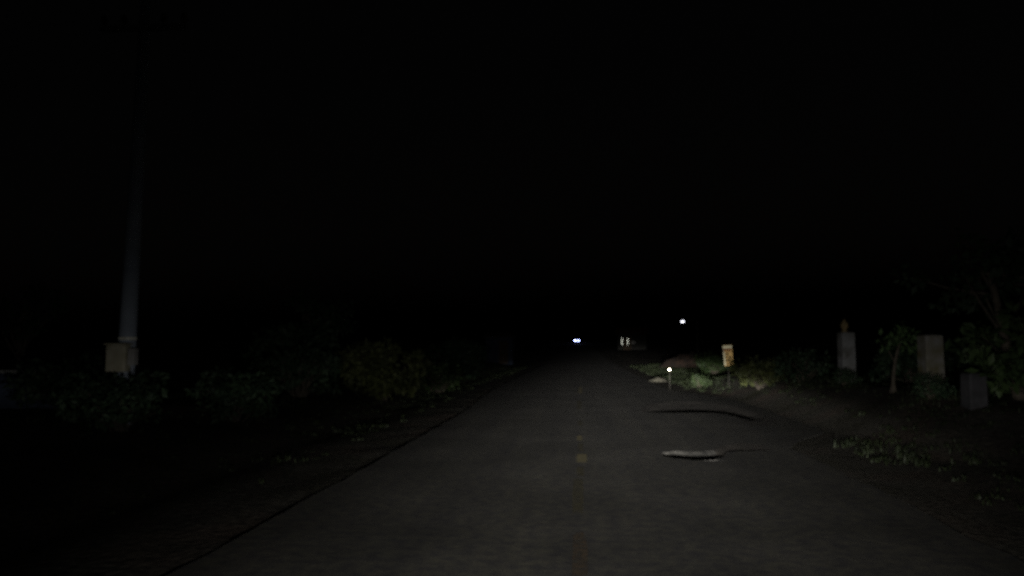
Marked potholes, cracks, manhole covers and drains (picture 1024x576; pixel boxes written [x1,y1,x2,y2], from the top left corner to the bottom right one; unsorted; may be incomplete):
pothole [640,401,779,426]
